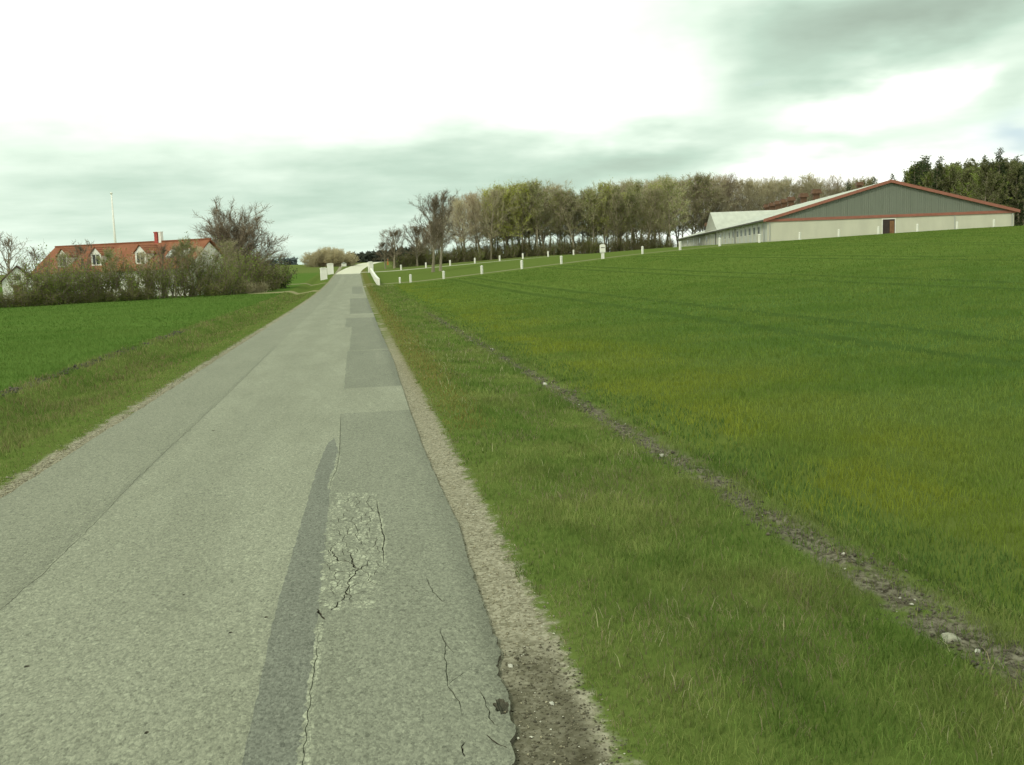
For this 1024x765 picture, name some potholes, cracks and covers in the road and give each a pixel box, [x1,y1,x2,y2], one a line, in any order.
pothole [493,698,509,714]
crack [317,495,385,619]
crack [440,631,507,748]
